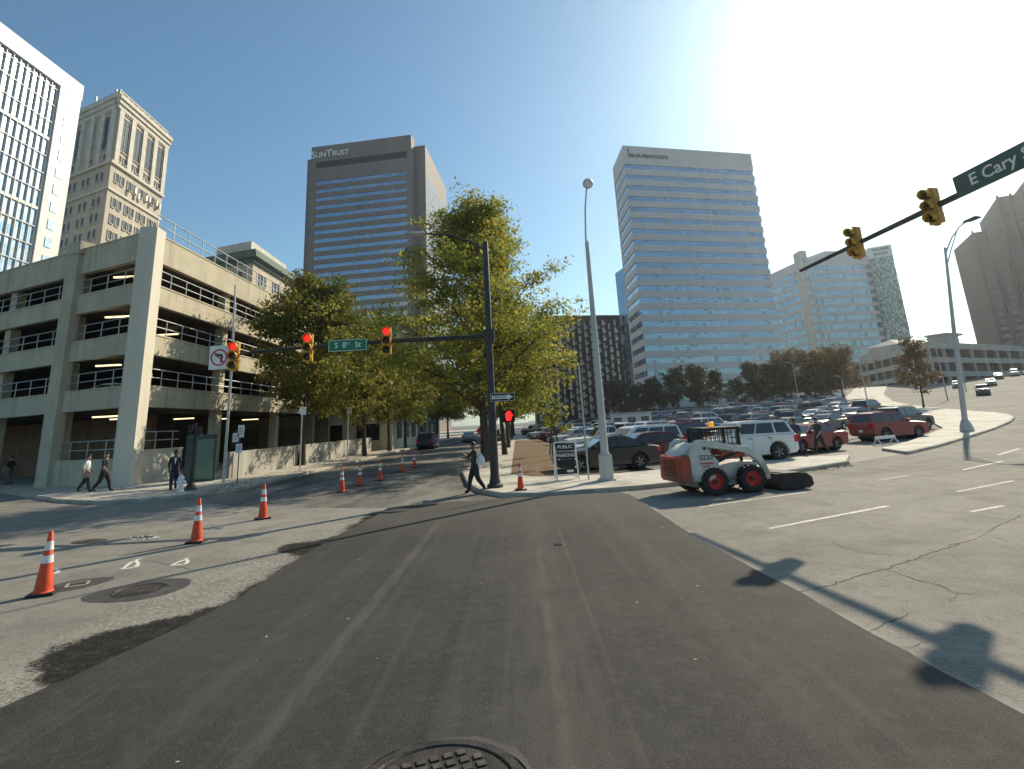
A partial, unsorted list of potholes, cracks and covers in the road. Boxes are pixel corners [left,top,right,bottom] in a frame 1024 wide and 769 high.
manhole cover [81,578,191,603]
crack [799,515,1020,602]
manhole cover [362,736,531,769]
